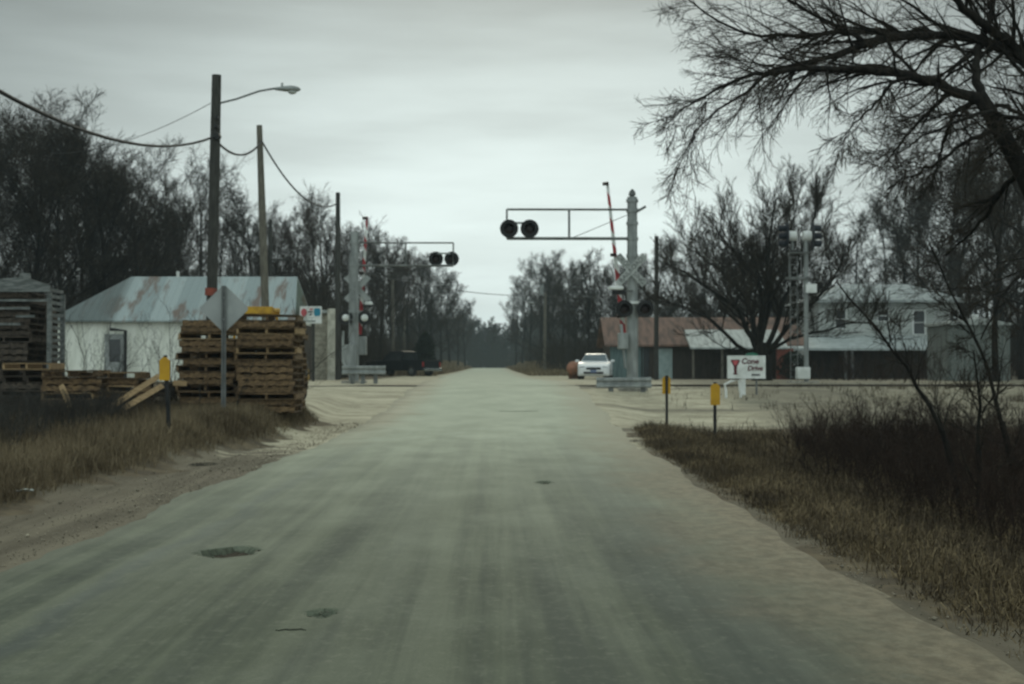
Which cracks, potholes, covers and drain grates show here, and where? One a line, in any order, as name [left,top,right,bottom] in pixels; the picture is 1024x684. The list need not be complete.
pothole [304,609,337,618]
pothole [192,546,259,559]
